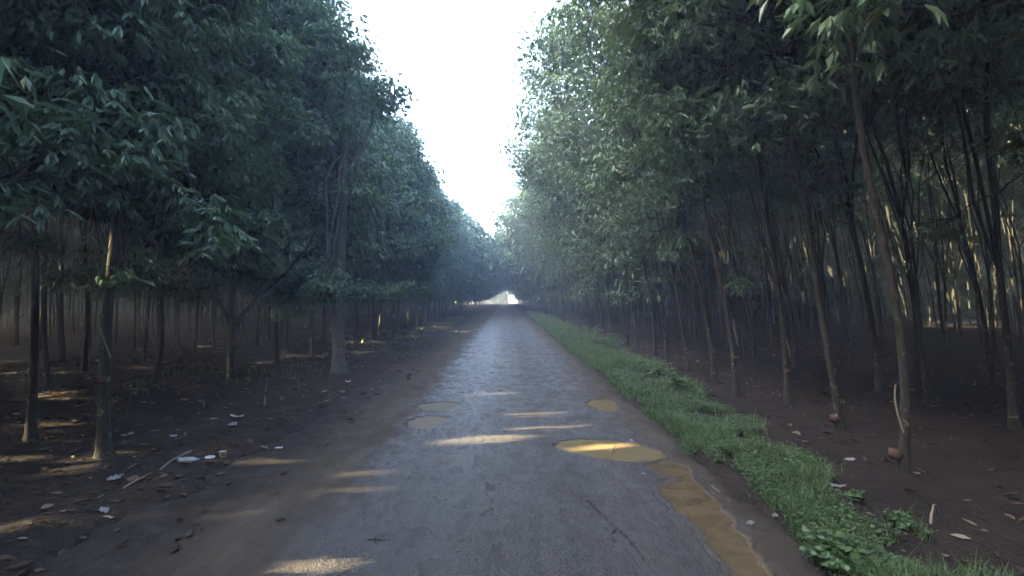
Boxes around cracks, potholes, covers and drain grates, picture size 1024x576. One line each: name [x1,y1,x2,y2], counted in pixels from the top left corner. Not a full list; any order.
crack [580,477,682,564]
pothole [415,401,463,411]
pothole [636,459,779,576]
pothole [580,398,622,413]
pothole [405,415,451,430]
pothole [549,438,669,465]
